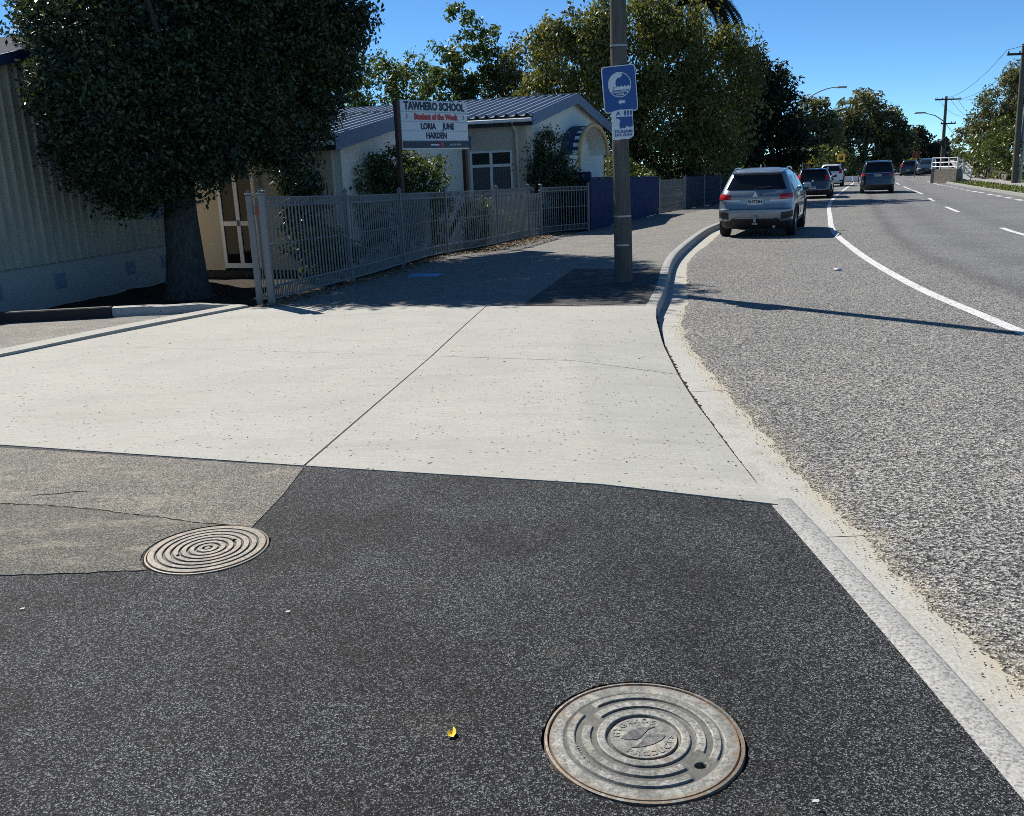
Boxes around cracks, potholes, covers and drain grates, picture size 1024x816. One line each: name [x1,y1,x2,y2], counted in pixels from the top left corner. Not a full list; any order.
manhole cover [144,526,270,576]
manhole cover [544,683,746,808]
crack [0,491,216,524]
